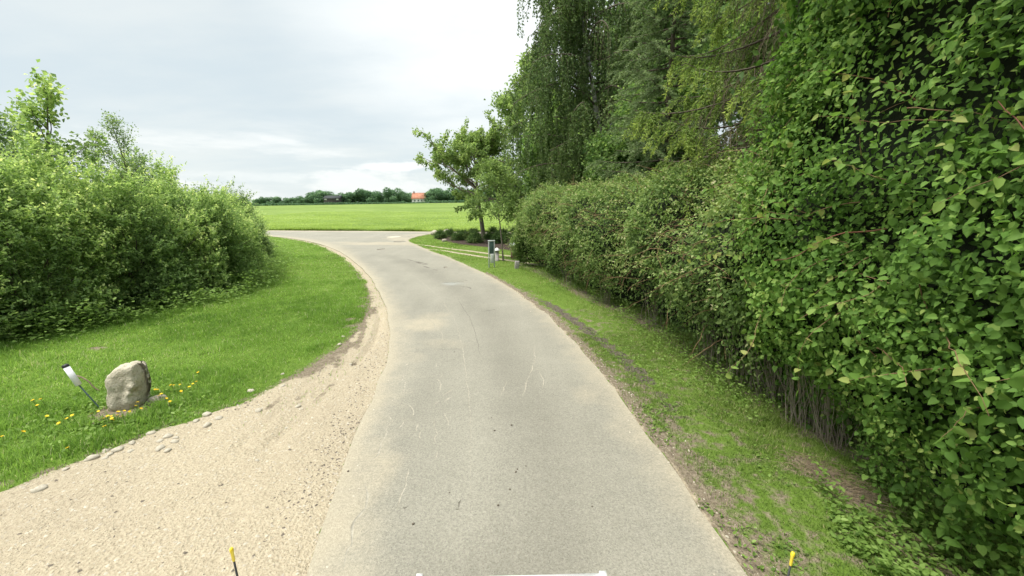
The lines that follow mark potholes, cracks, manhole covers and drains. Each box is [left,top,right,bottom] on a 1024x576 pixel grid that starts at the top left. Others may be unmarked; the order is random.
crack [342,482,369,572]
crack [408,259,495,353]
crack [370,361,453,509]
crack [501,347,544,395]
